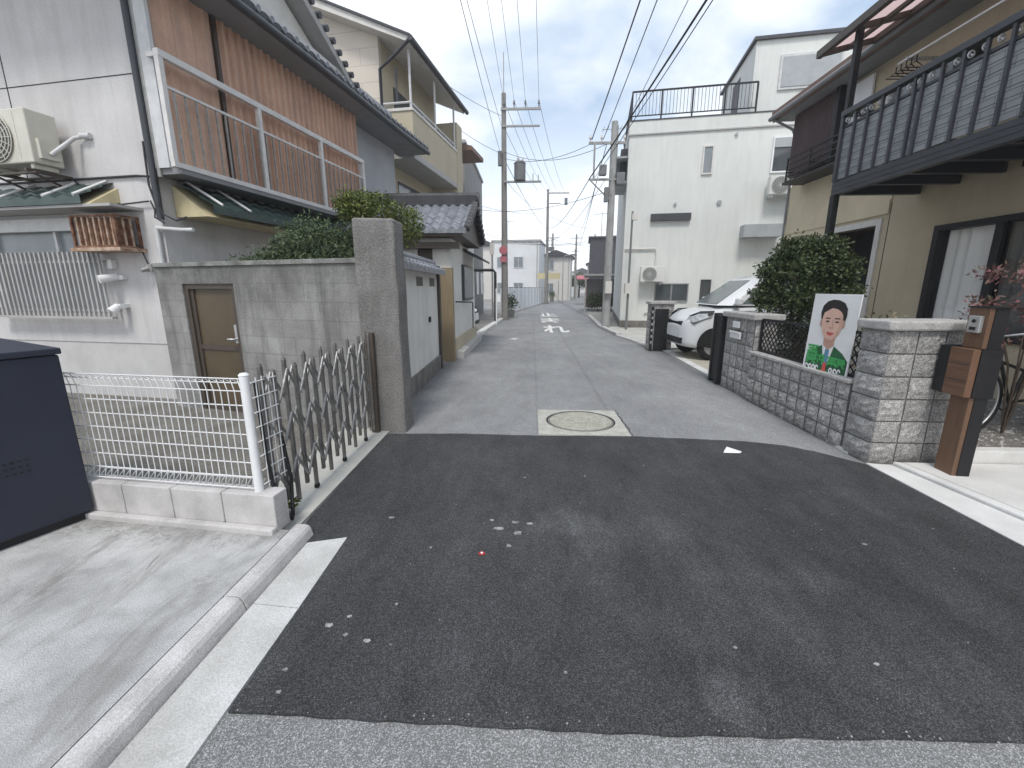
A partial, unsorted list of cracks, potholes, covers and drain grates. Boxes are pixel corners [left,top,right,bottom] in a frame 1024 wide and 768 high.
manhole cover [538,410,631,436]
